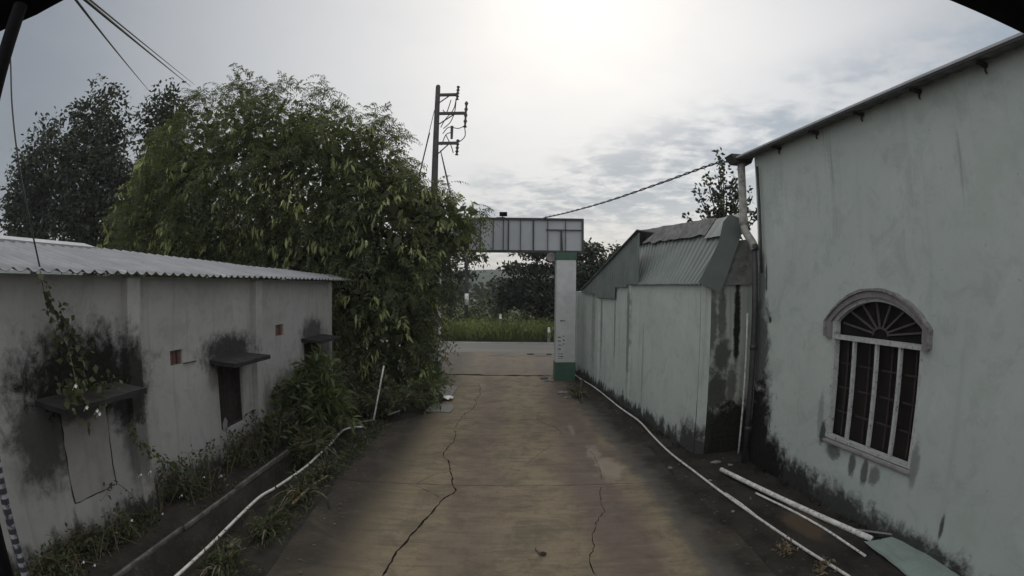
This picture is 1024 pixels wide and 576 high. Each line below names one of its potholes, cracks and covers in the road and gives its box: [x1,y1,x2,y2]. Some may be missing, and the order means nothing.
crack [589,452,605,575]
crack [382,386,481,576]
